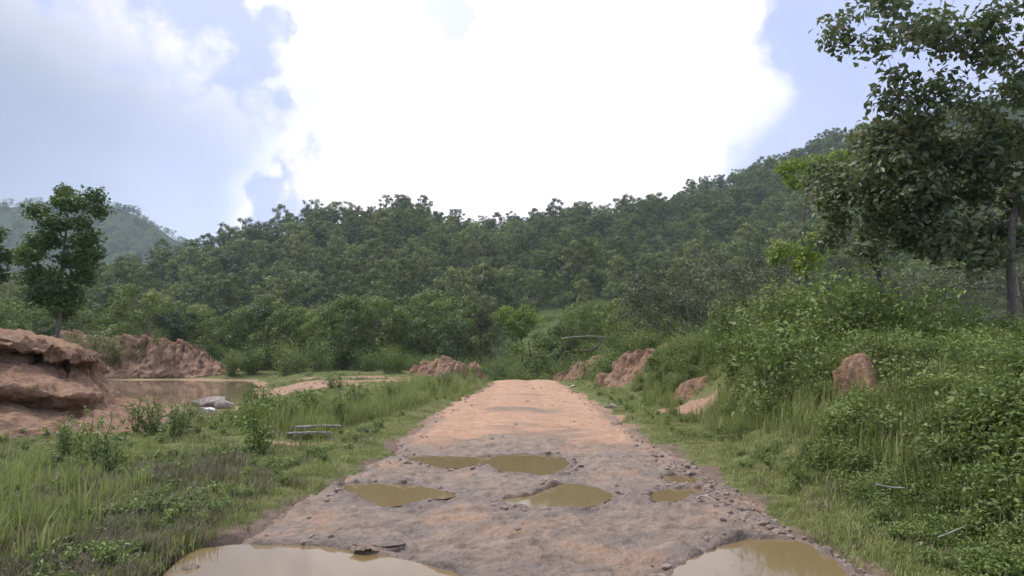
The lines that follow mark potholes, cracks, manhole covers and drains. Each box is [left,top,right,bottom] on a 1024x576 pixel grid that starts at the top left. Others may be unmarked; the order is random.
pothole [327,477,465,508]
pothole [163,537,480,576]
pothole [492,479,621,513]
pothole [641,484,714,505]
pothole [654,471,711,484]
pothole [658,528,863,576]
pothole [398,452,577,476]
